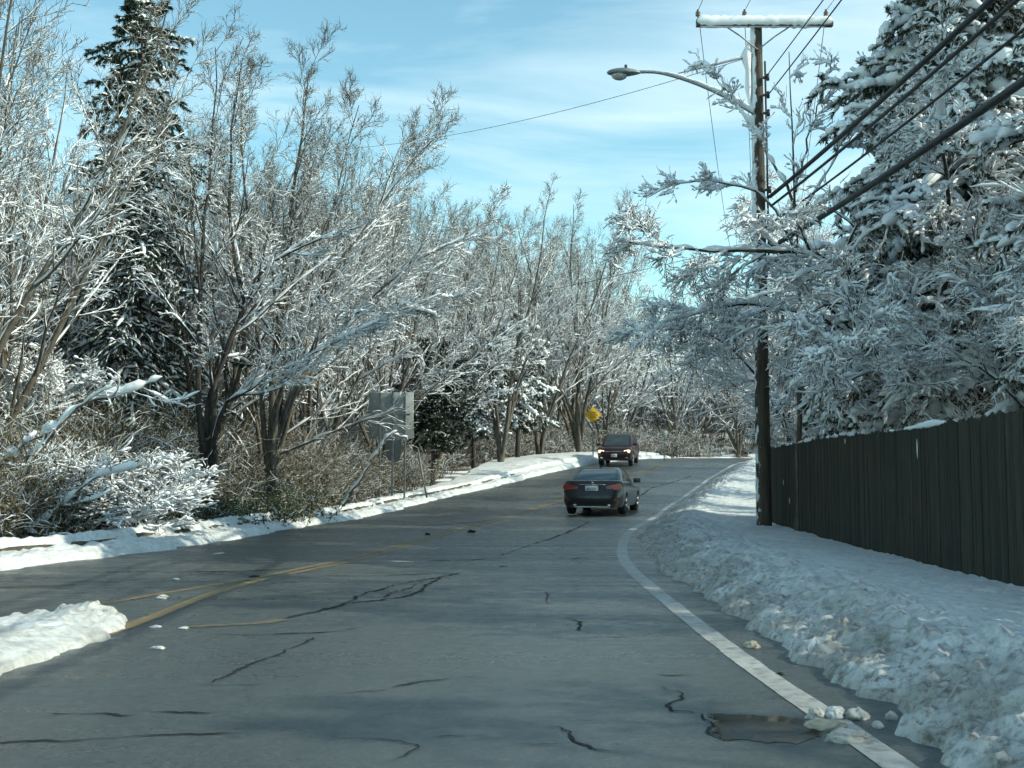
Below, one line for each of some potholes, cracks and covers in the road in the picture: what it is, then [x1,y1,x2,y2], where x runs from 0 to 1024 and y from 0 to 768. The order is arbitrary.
crack [342,676,476,693]
crack [525,726,625,752]
crack [328,735,472,760]
crack [0,711,241,743]
pothole [707,713,824,744]
crack [661,674,722,740]
crack [213,522,590,685]
